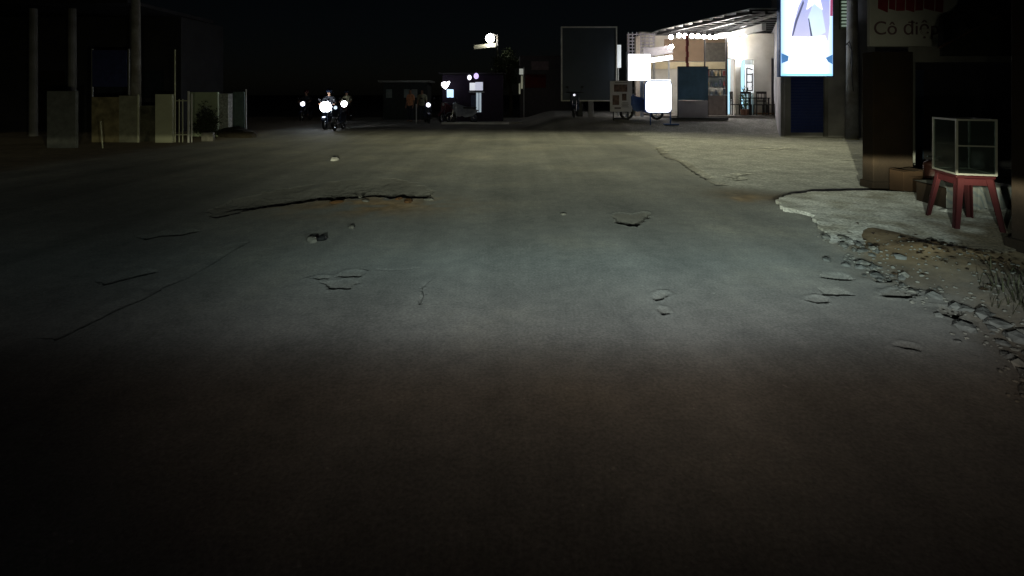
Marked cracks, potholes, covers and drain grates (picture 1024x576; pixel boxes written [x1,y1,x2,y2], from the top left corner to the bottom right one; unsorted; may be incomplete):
pothole [891,342,923,352]
pothole [311,270,366,290]
crack [375,267,434,305]
pothole [651,291,670,301]
pothole [611,211,651,227]
pothole [803,295,831,304]
pothole [936,305,966,319]
pothole [879,288,923,299]
crack [28,228,251,341]
